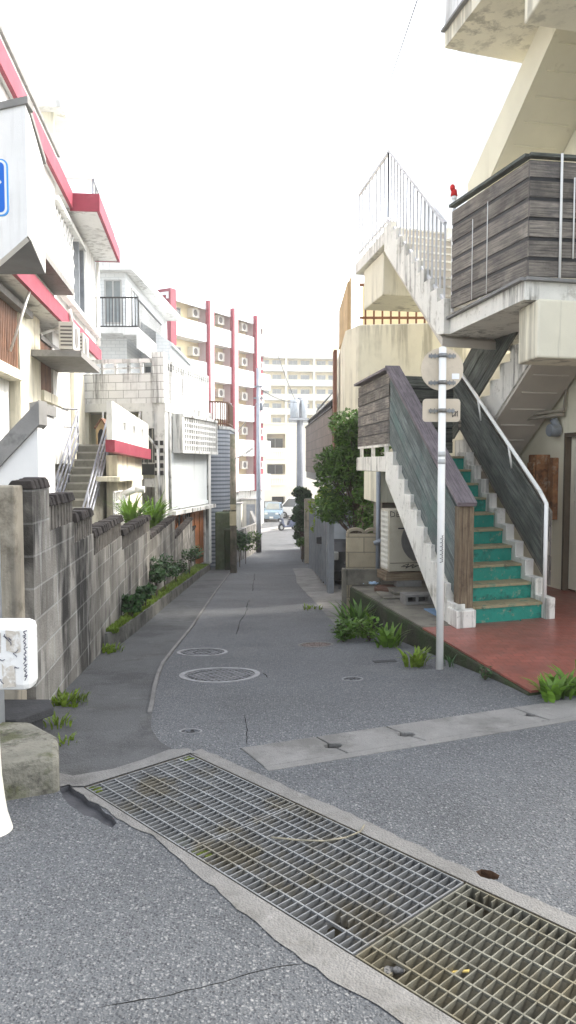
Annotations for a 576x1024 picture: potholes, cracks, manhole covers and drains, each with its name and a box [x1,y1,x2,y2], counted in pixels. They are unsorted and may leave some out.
drain grate [187,805,464,957]
manhole cover [177,648,228,656]
pothole [476,869,499,880]
drain grate [86,755,296,852]
manhole cover [179,667,260,683]
crack [98,963,307,1008]
drain grate [355,883,576,1024]
